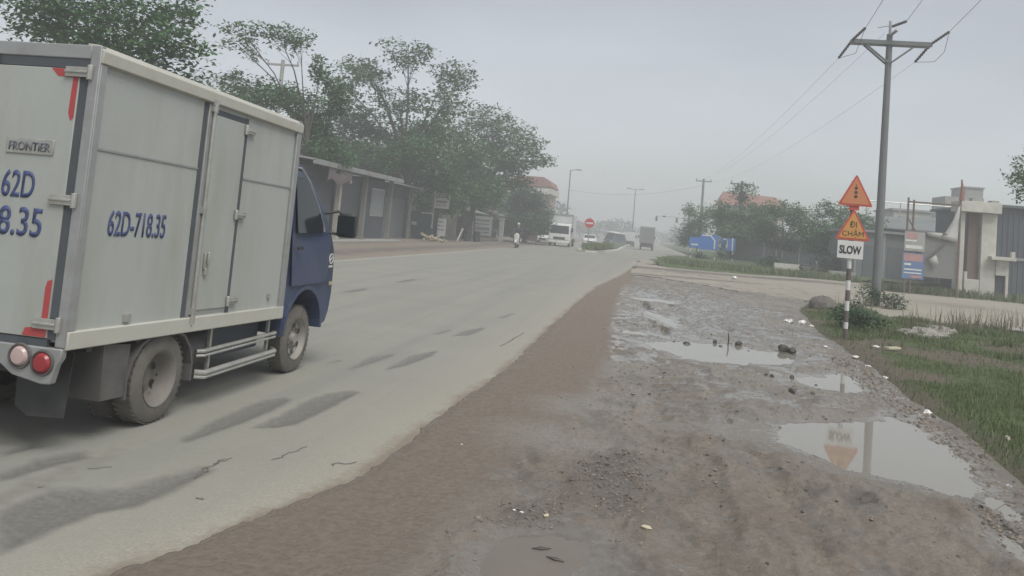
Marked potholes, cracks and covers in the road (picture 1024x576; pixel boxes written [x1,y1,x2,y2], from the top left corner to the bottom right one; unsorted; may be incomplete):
pothole [638,338,804,367]
pothole [446,522,626,576]
pothole [780,369,888,395]
pothole [763,413,1010,510]
crack [189,457,233,479]
